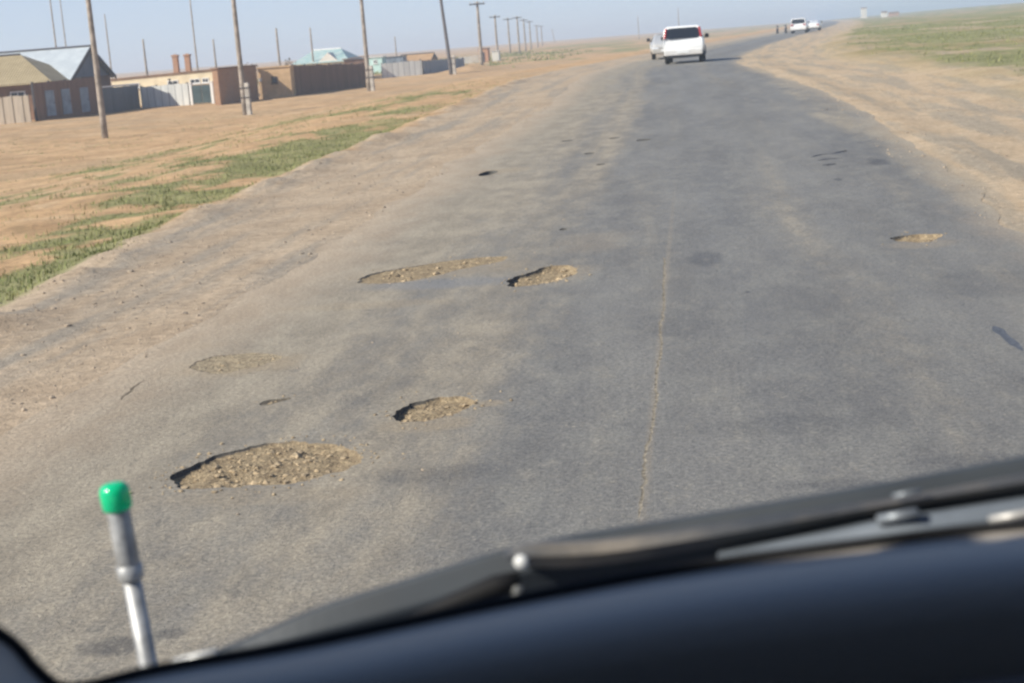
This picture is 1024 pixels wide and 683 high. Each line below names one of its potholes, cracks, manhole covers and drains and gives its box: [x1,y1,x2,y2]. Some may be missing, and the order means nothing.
pothole [349,256,516,284]
pothole [501,265,592,292]
pothole [373,390,513,429]
pothole [189,353,283,374]
crack [121,381,143,400]
pothole [130,434,405,501]
pothole [882,232,947,245]
pothole [259,395,296,405]
crack [638,258,666,518]
